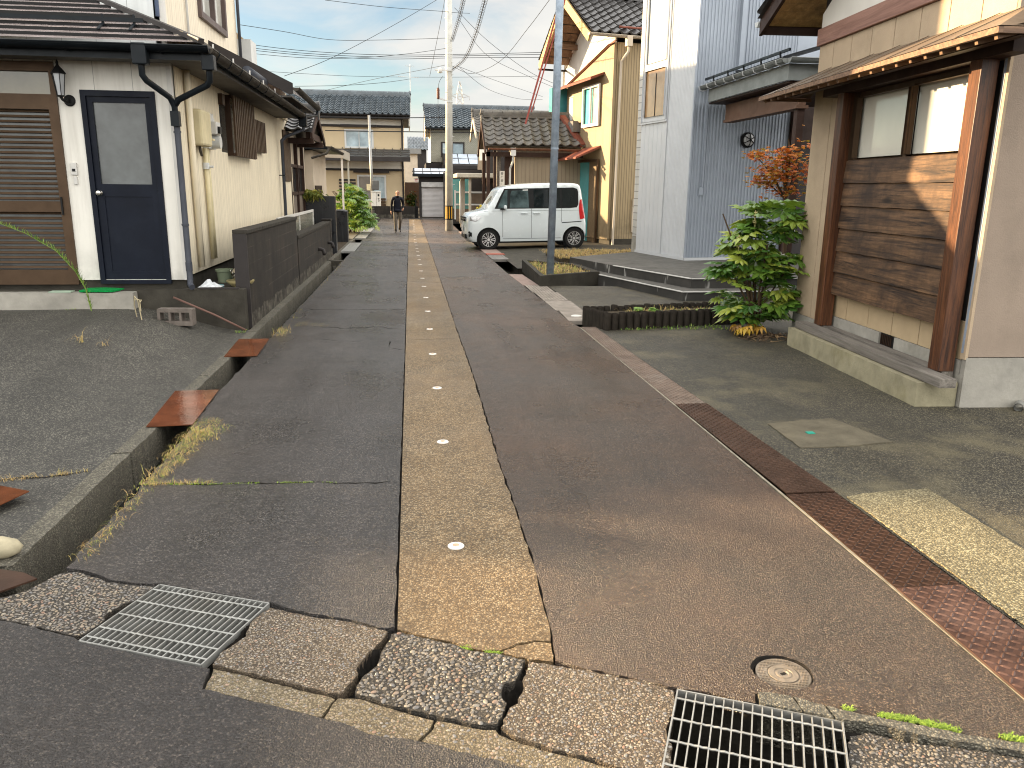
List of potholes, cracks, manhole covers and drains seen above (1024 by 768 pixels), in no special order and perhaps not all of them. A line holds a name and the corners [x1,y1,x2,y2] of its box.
manhole cover [750,655,814,689]
crack [1,471,88,480]
drain grate [79,584,270,668]
drain grate [662,689,849,768]
